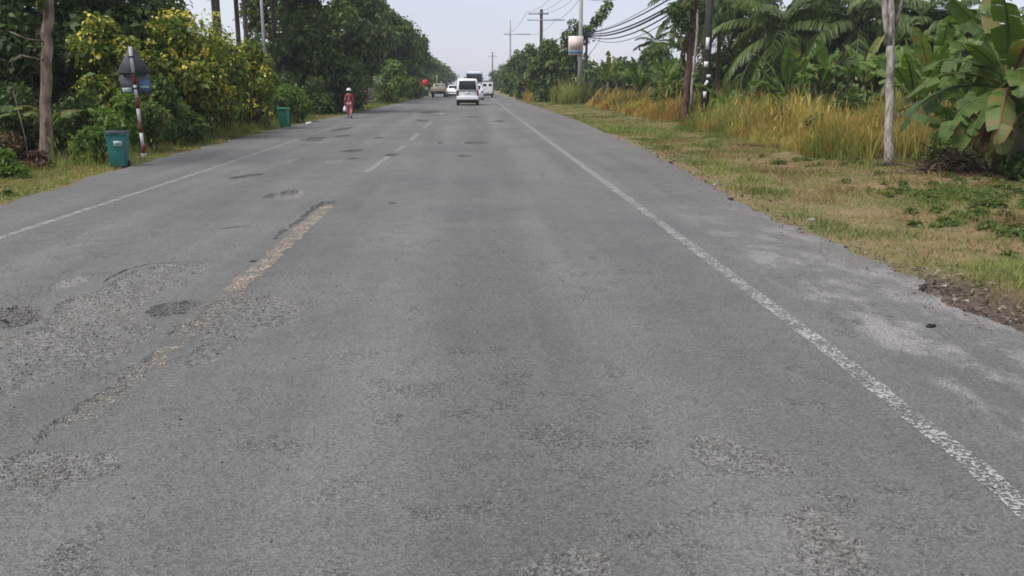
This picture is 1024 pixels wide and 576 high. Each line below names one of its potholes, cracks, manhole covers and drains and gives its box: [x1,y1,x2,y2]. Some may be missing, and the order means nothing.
pothole [273,201,337,240]
pothole [261,189,313,200]
crack [102,260,198,284]
